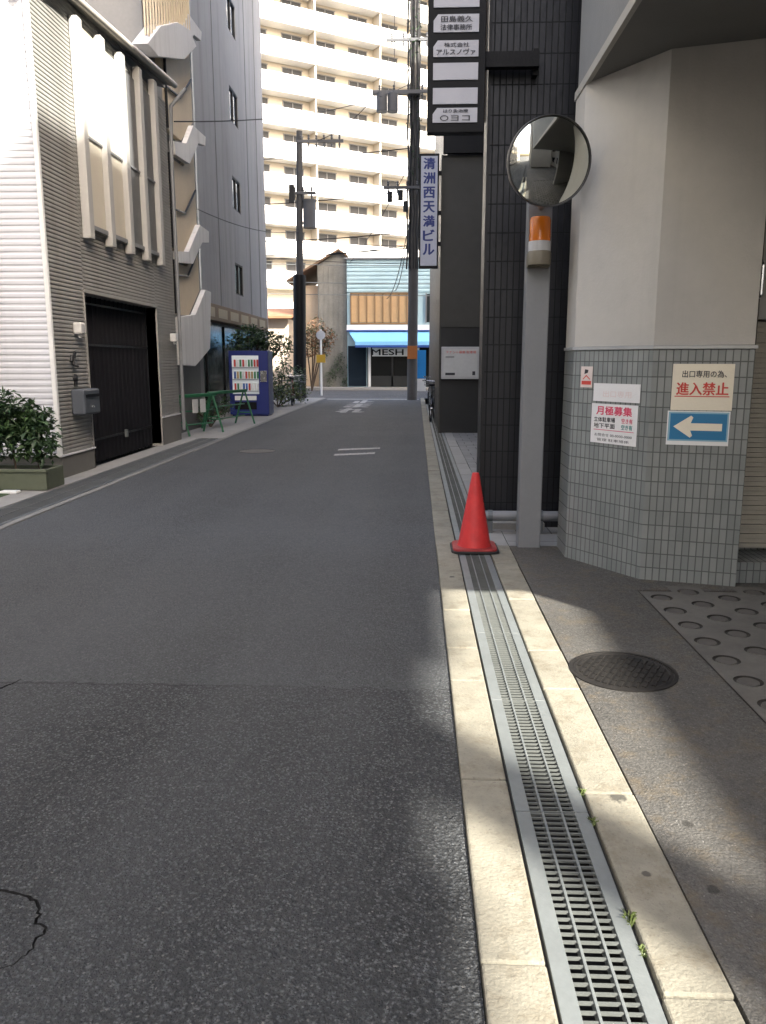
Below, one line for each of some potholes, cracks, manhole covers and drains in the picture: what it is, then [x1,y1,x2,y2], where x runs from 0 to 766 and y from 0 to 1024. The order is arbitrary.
drain grate [516,811,668,1024]
drain grate [440,466,459,476]
drain grate [450,513,464,532]
drain grate [491,700,588,818]
drain grate [447,498,467,513]
manhole cover [569,651,679,692]
drain grate [444,485,467,499]
drain grate [476,633,545,704]
drain grate [466,588,519,634]
crack [0,889,47,969]
drain grate [438,459,456,467]
drain grate [459,556,502,589]
